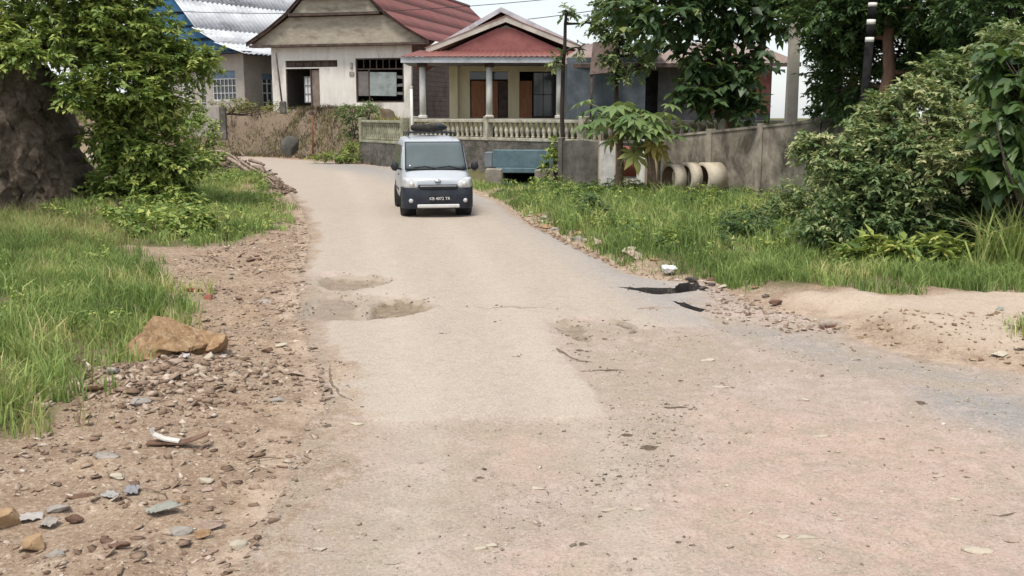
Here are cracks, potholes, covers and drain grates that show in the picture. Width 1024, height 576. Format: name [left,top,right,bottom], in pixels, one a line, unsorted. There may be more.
crack [556,348,626,372]
crack [328,364,353,401]
pothole [365,297,434,320]
pothole [308,274,393,293]
pothole [609,318,641,334]
pothole [552,319,598,342]
